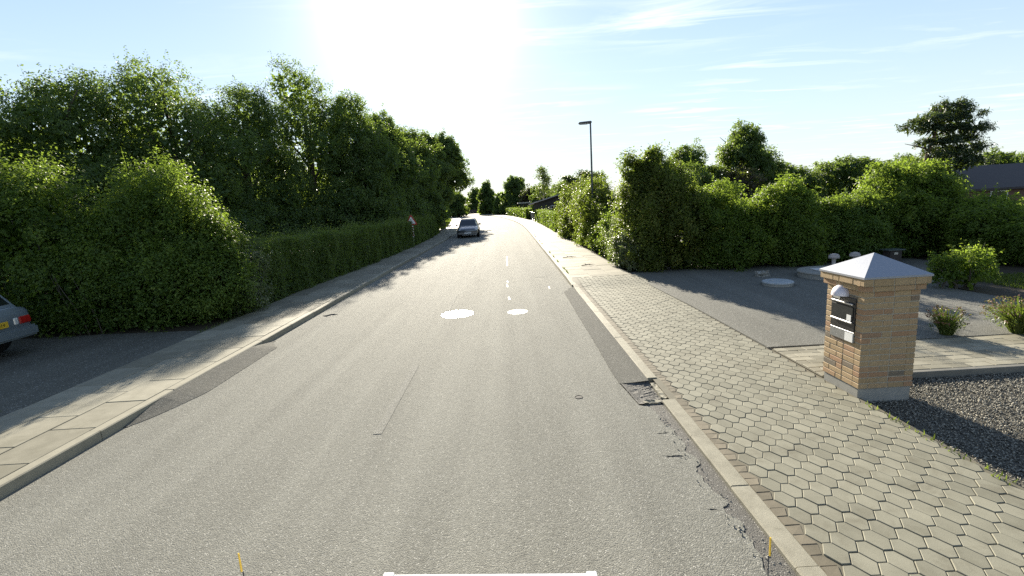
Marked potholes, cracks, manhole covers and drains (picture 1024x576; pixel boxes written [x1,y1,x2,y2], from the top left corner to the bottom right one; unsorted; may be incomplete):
pothole [621,380,663,404]
